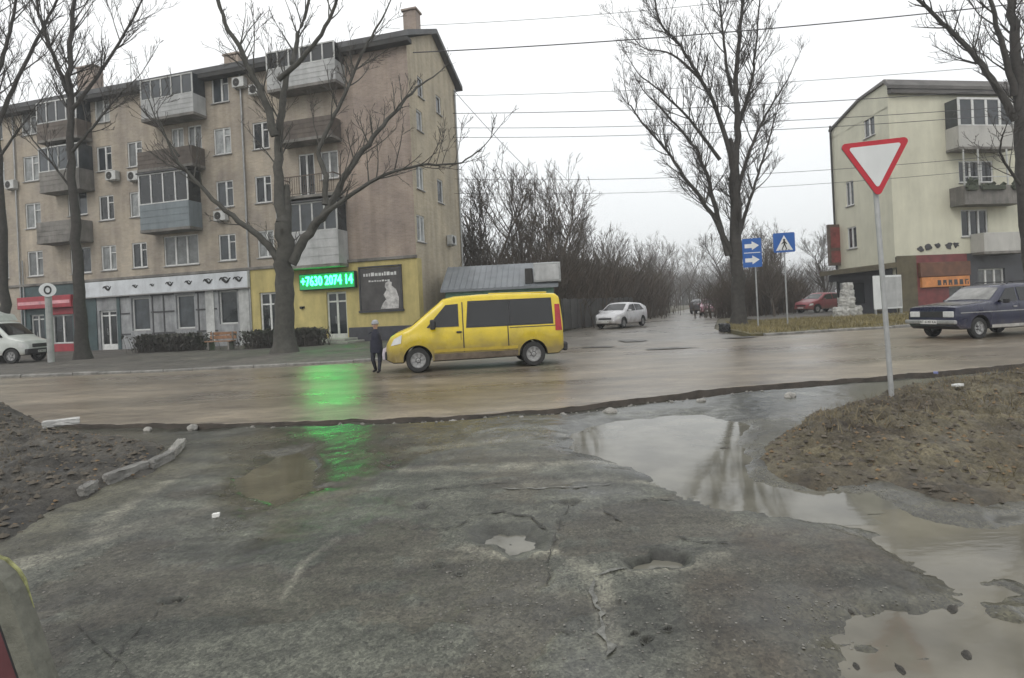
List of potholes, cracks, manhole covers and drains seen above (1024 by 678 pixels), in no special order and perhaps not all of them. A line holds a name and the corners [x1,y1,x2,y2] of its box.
pothole [617,548,696,571]
crack [391,505,569,586]
crack [553,567,628,656]
crack [426,482,610,491]
pothole [462,520,554,561]
crack [76,610,158,678]
